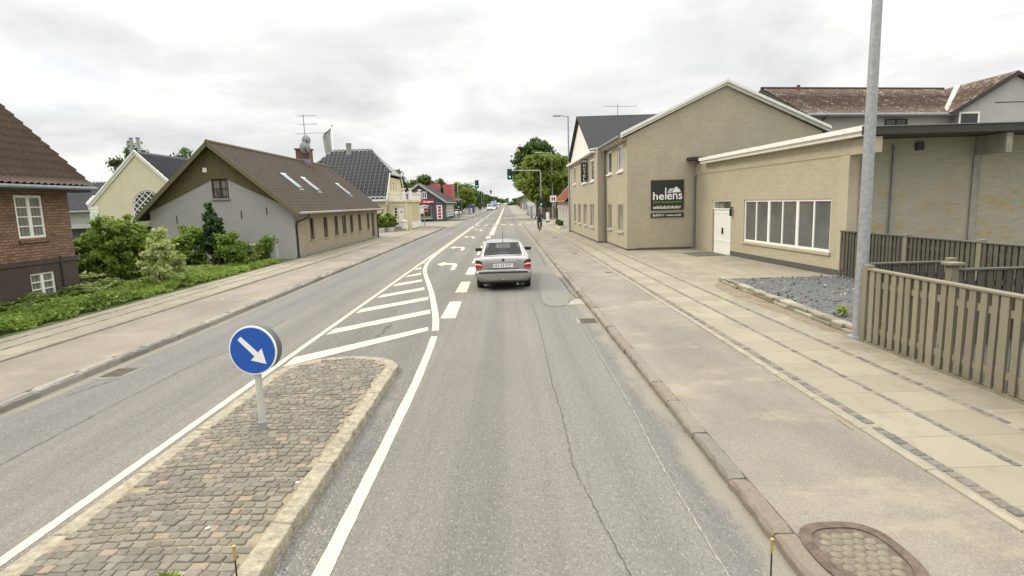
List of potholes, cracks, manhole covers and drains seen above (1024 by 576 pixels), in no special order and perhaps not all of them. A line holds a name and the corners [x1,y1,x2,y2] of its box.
manhole cover [799,521,930,576]
crack [532,305,631,576]
